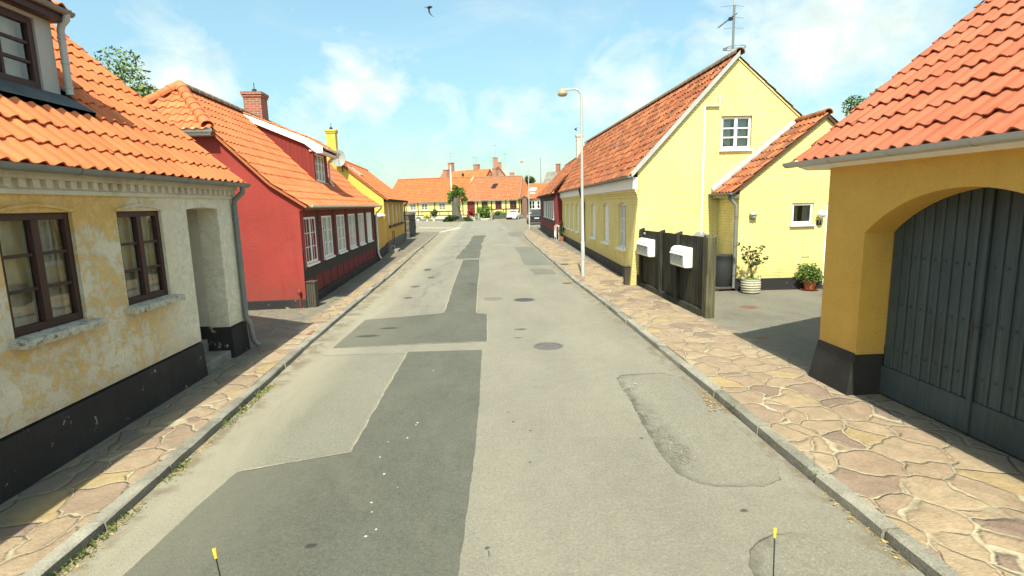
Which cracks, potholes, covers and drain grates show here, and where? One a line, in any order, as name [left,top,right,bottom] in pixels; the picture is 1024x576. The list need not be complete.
manhole cover [533,342,563,350]
